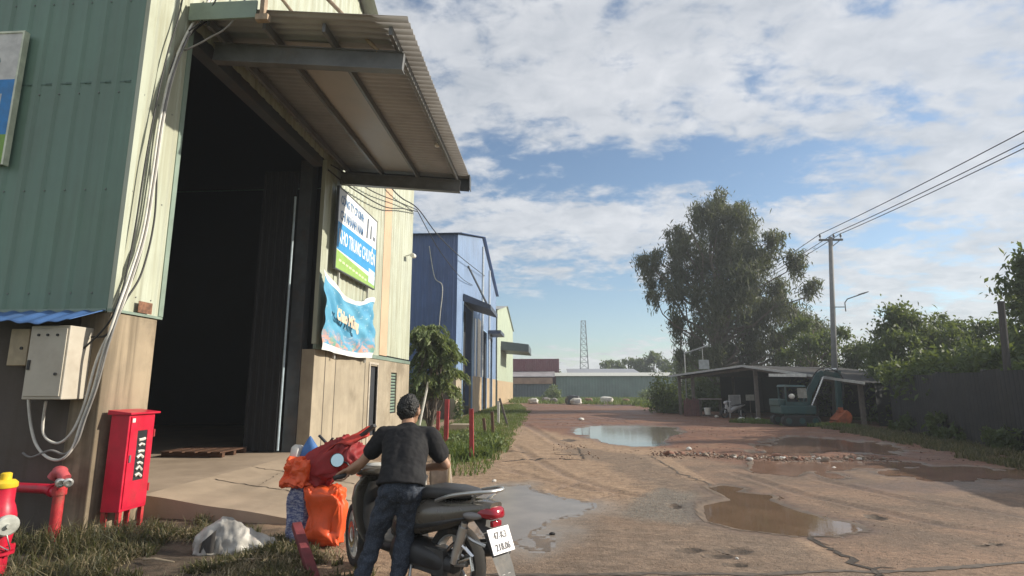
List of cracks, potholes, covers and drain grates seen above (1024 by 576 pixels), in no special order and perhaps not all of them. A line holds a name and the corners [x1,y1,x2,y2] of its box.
crack [808,536,891,576]
crack [216,466,354,501]
pothole [694,484,870,539]
crack [652,457,729,499]
